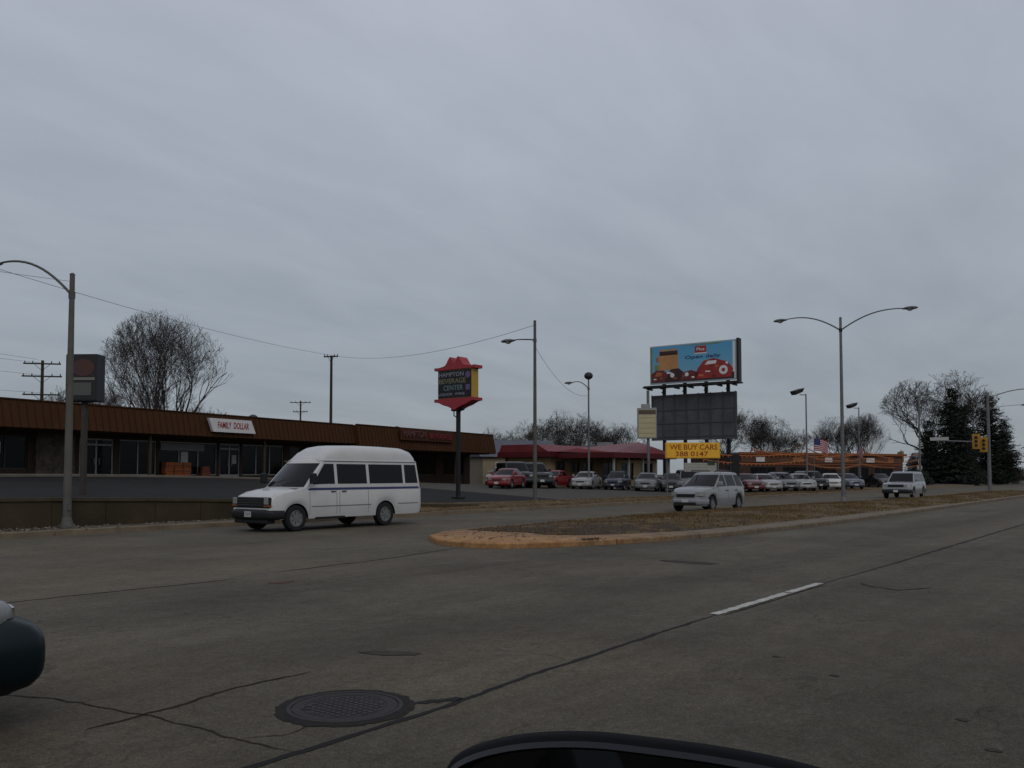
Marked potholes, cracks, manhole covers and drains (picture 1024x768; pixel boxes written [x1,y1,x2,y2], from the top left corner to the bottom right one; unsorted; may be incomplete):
manhole cover [274,689,415,727]
crack [14,672,308,752]
